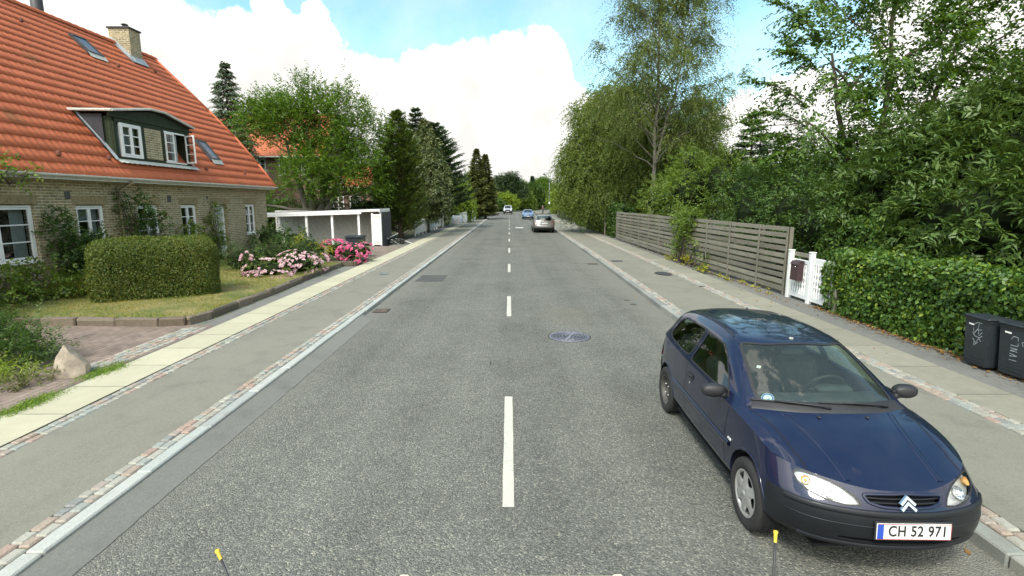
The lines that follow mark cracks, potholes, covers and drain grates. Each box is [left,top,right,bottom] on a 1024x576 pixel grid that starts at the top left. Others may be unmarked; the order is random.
manhole cover [548,331,591,342]
